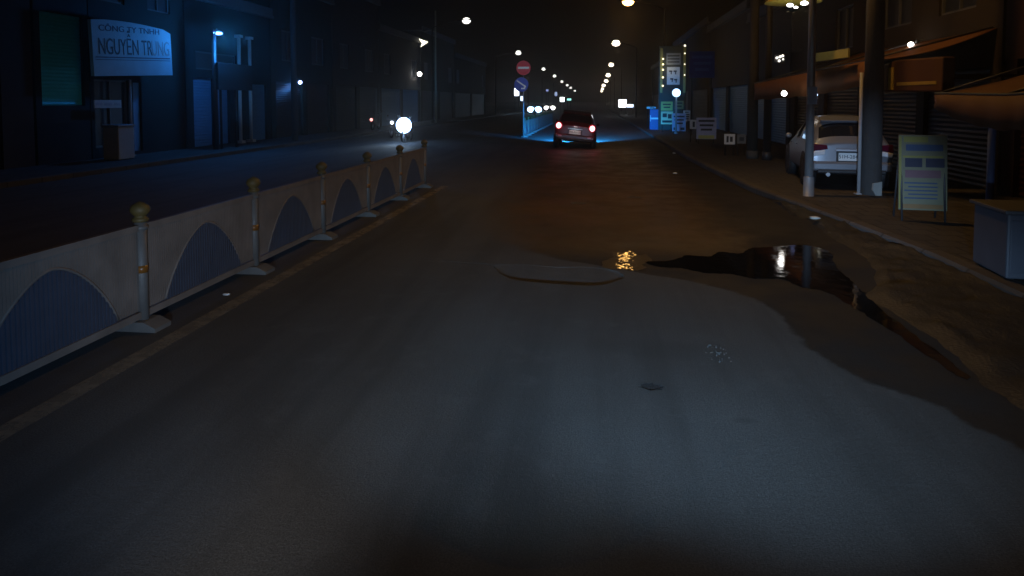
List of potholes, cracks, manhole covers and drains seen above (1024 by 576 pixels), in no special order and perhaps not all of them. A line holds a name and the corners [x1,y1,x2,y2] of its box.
pothole [640,382,665,391]
